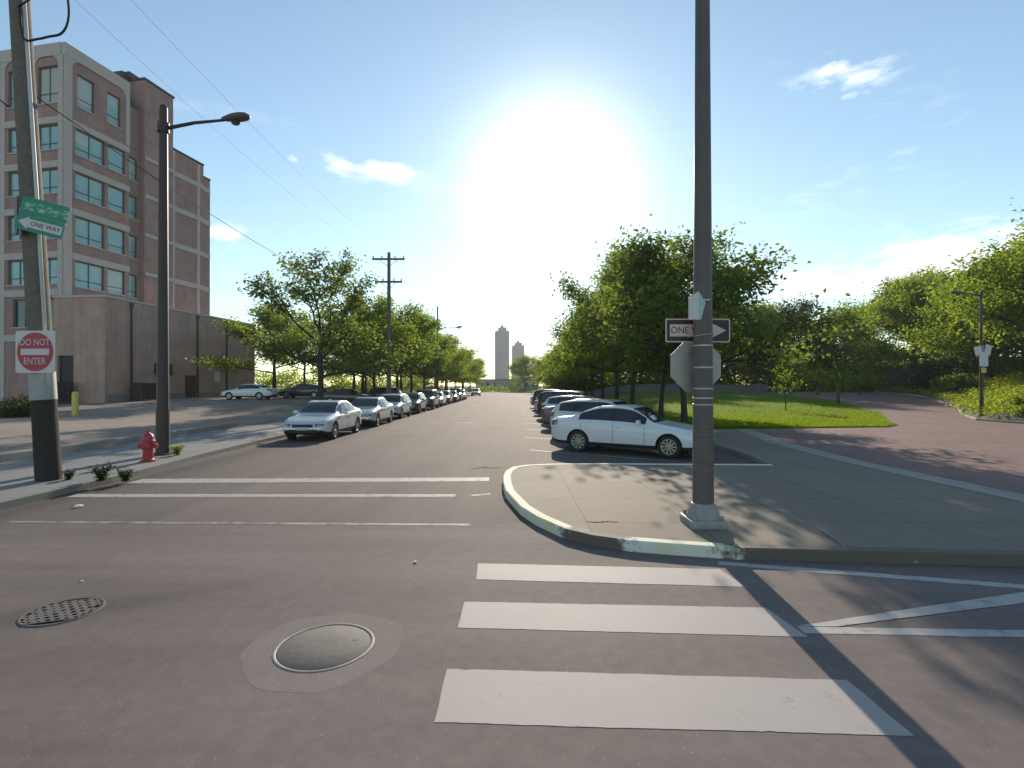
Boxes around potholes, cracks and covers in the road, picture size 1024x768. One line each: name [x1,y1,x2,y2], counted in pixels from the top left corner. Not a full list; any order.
manhole cover [240,613,404,693]
manhole cover [16,597,106,627]
